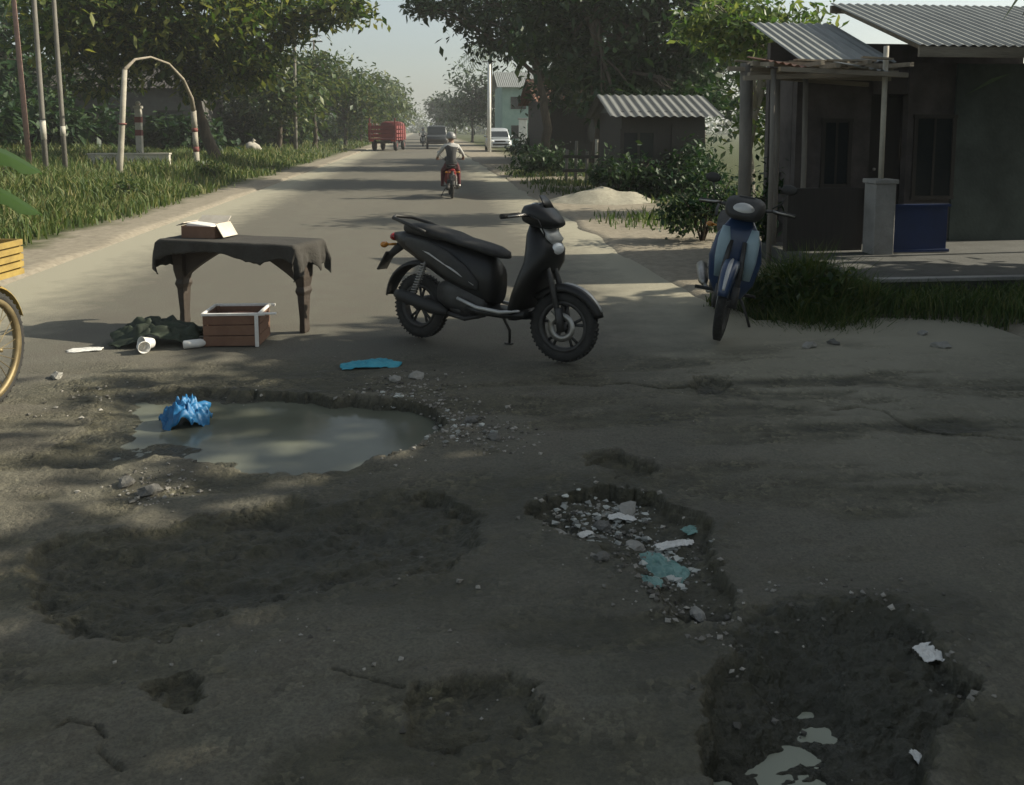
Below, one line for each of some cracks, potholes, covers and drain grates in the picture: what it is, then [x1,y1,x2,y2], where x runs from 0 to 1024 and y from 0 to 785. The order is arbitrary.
crack [558,382,691,390]
pothole [137,670,209,714]
pothole [583,448,660,479]
pothole [694,592,982,785]
pothole [46,374,448,475]
pothole [397,670,545,757]
pothole [17,489,491,644]
pothole [522,484,739,624]
crack [828,405,1024,442]
